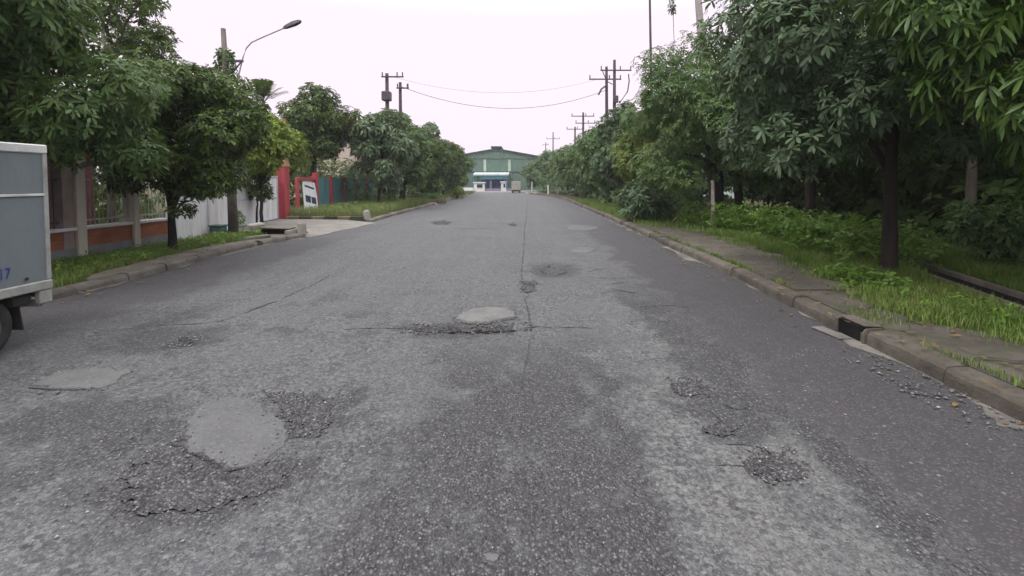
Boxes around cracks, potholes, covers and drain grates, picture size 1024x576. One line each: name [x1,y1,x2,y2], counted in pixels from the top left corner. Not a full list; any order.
pothole [257,391,334,438]
pothole [119,443,301,520]
pothole [670,376,704,397]
pothole [539,265,567,276]
pothole [405,325,521,334]
crack [344,316,587,334]
pothole [520,280,540,293]
crack [151,277,327,326]
pothole [743,449,808,484]
drain grate [812,315,882,341]
pothole [701,420,739,437]
